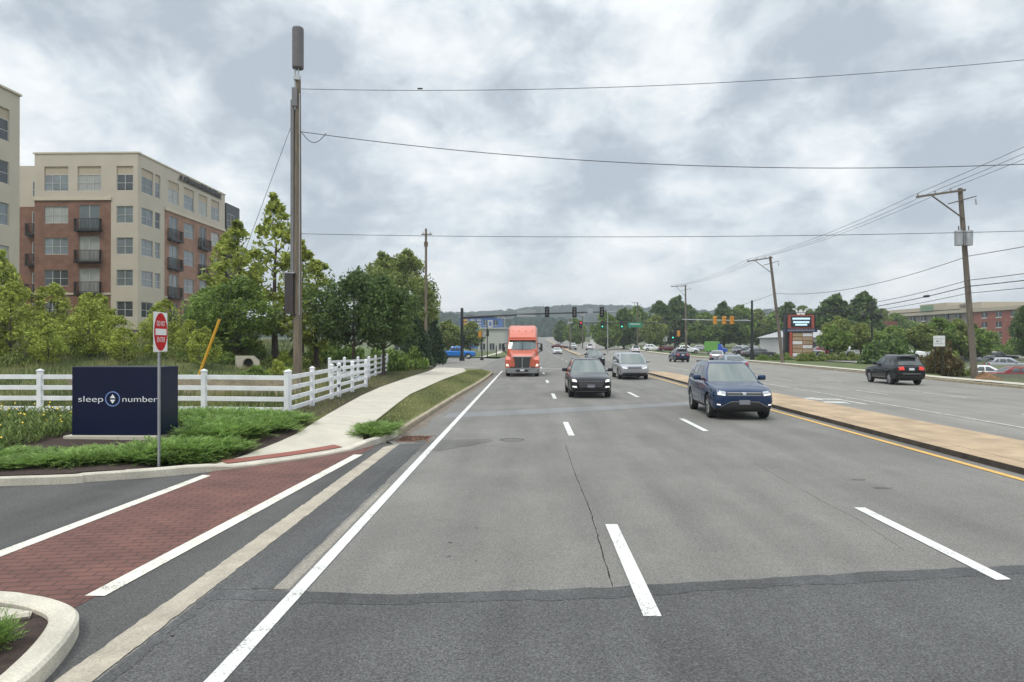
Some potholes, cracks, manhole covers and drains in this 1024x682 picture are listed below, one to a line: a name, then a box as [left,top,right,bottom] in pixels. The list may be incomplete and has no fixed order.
drain grate [393,434,436,442]
crack [565,445,613,587]
